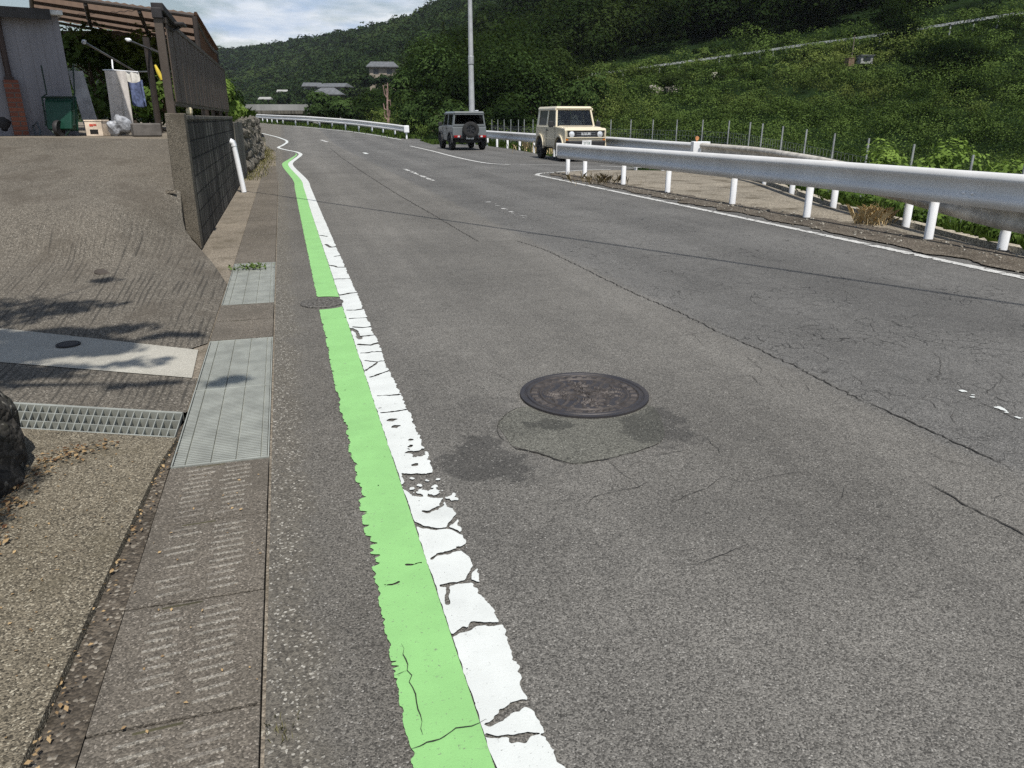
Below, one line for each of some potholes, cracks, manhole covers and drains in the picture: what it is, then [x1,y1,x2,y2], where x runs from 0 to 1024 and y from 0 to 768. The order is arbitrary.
manhole cover [520,372,649,419]
drain grate [221,262,276,306]
manhole cover [300,298,343,309]
manhole cover [55,340,81,348]
crack [914,345,1018,429]
crack [497,406,844,533]
drain grate [170,337,273,469]
drain grate [13,402,185,438]
crack [396,643,482,749]
crack [851,451,1024,559]
